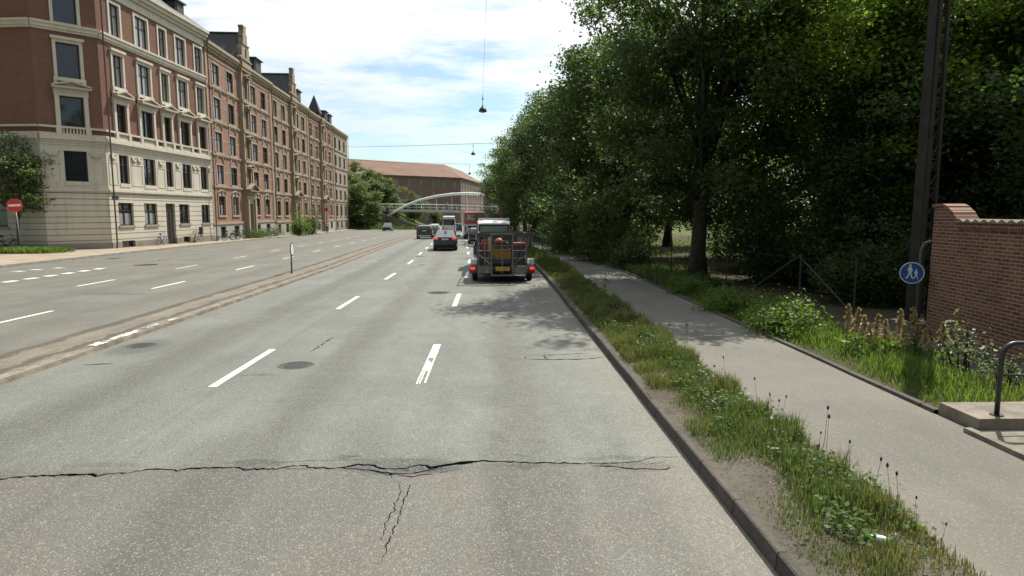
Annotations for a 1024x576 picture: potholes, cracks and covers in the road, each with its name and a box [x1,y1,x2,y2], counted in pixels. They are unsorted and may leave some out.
manhole cover [277,361,314,370]
crack [0,457,671,564]
